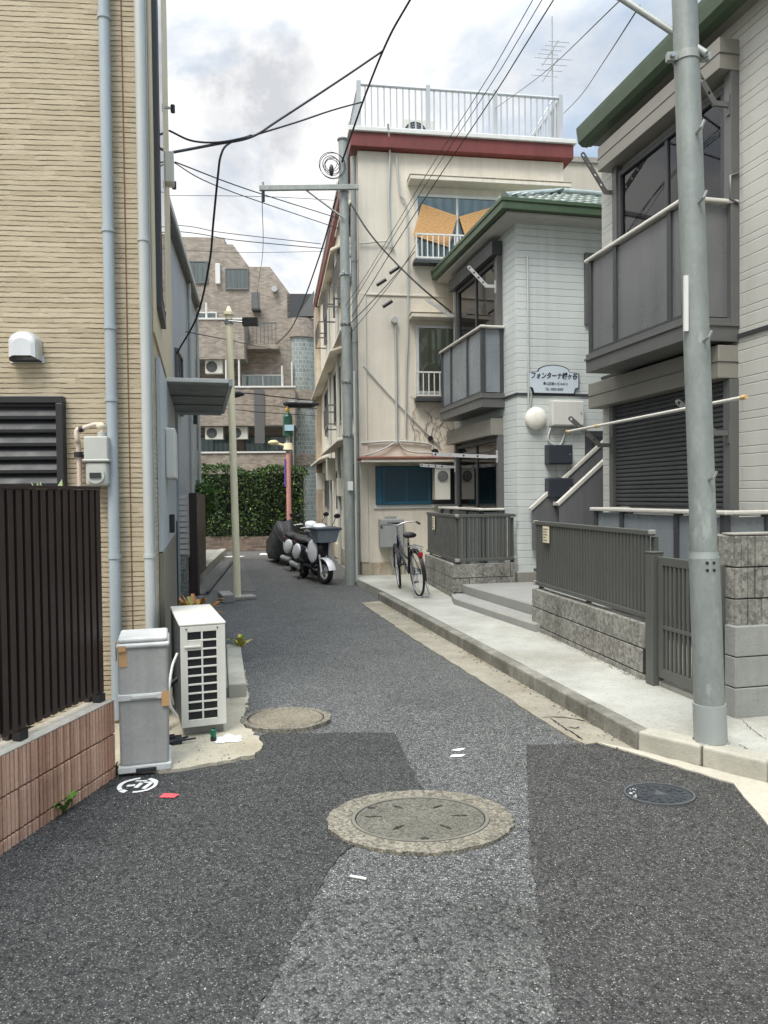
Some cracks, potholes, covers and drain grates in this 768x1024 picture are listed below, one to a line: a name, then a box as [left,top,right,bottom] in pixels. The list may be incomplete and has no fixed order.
crack [549,716,585,739]
manhole cover [326,790,515,856]
manhole cover [240,706,331,733]
manhole cover [623,782,696,806]
